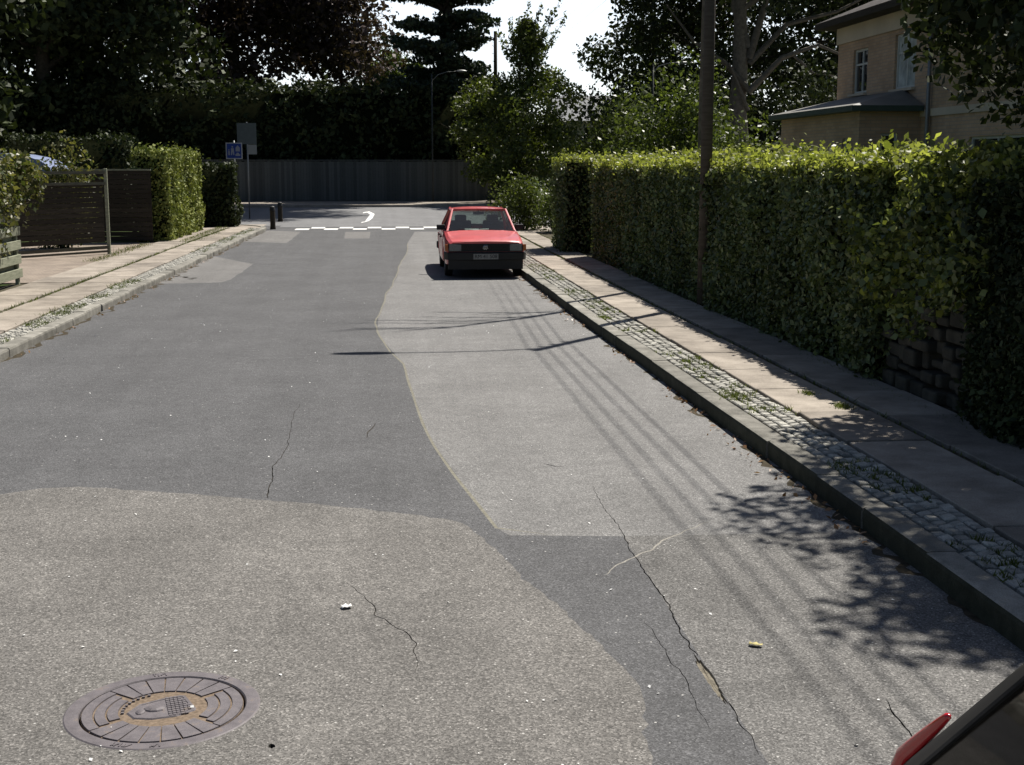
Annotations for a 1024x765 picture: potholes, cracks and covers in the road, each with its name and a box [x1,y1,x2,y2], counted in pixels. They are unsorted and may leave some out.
crack [594,491,710,727]
crack [347,583,418,672]
crack [727,701,759,754]
crack [267,404,300,499]
crack [886,699,912,737]
manhole cover [62,672,260,750]
